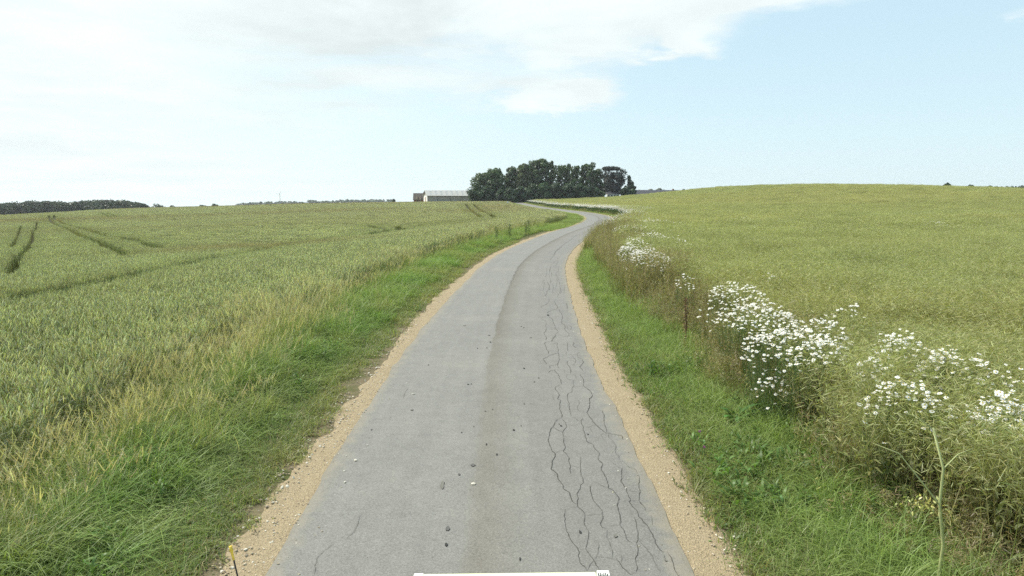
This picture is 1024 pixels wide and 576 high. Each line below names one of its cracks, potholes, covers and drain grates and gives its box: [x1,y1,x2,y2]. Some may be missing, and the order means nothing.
crack [543,245,677,574]
